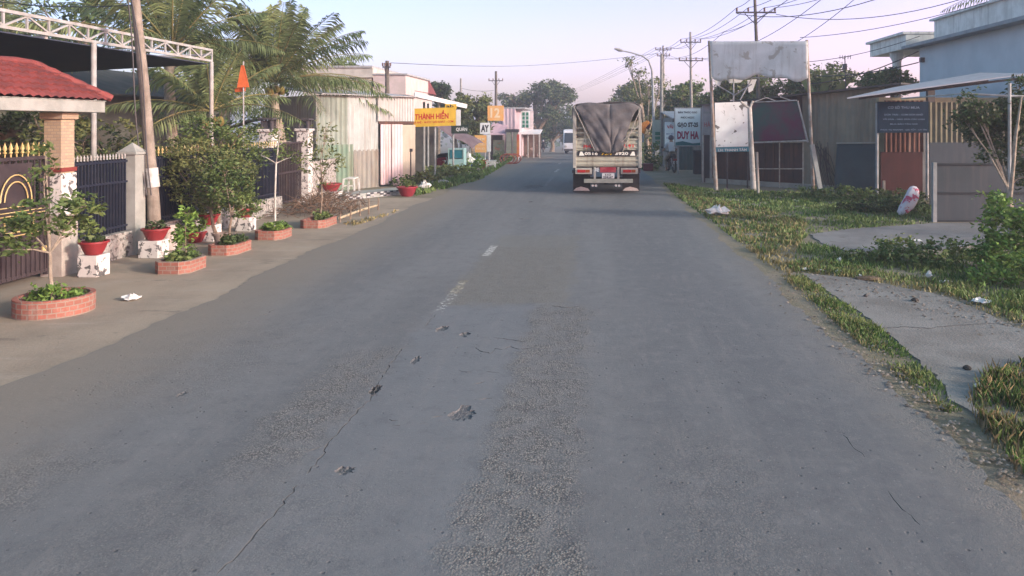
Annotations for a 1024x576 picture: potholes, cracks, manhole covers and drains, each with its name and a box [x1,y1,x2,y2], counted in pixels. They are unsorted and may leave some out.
pothole [447,405,477,421]
pothole [334,466,356,475]
crack [216,316,435,575]
crack [462,338,525,399]
